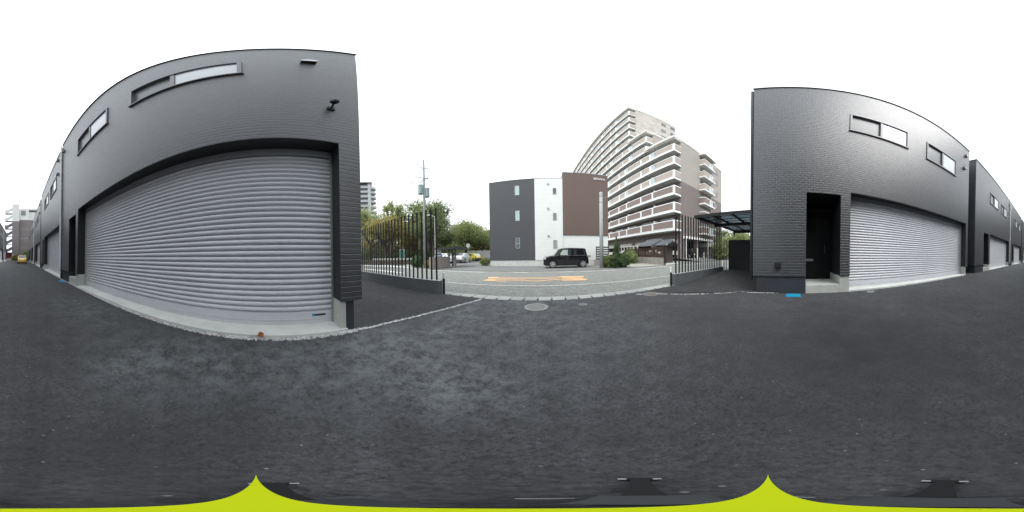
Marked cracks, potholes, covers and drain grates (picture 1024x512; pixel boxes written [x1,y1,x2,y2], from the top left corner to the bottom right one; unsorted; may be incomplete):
manhole cover [524,303,548,311]
